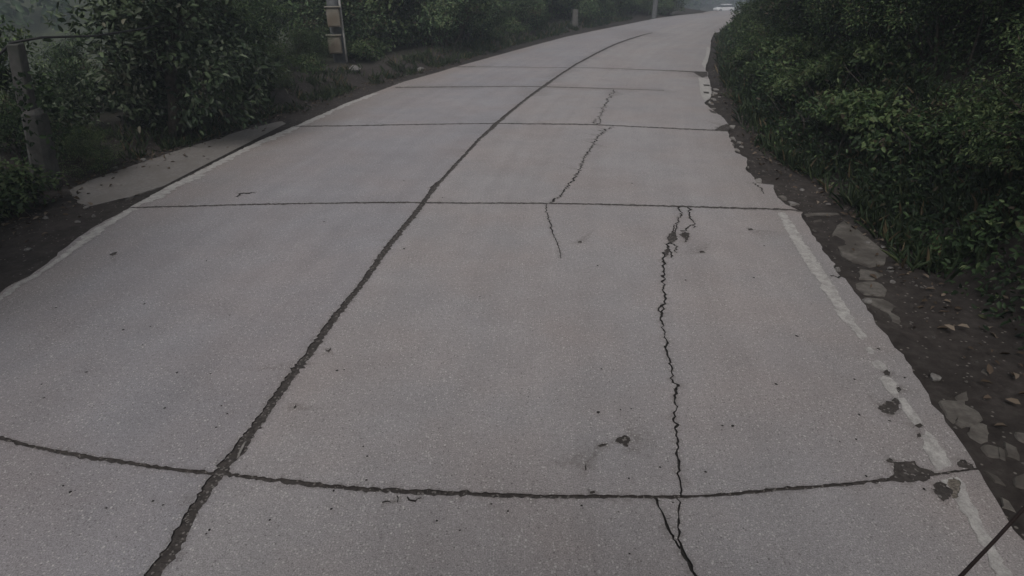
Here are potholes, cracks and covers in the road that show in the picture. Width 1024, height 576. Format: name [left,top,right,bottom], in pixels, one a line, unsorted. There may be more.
crack [655,208,697,576]
crack [545,90,615,257]
pothole [887,461,934,483]
pothole [931,482,953,502]
pothole [878,398,900,415]
pothole [615,435,631,447]
